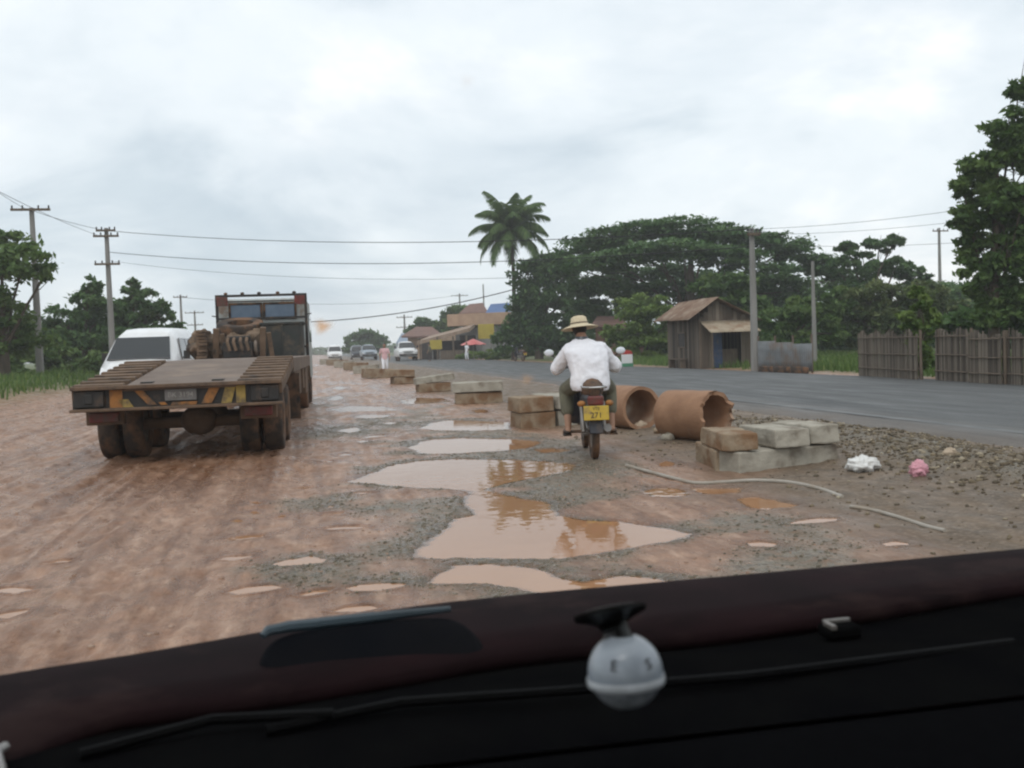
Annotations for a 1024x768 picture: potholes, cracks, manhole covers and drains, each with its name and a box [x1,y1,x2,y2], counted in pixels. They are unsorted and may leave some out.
pothole [652,459,681,468]
pothole [412,419,516,431]
pothole [398,489,707,562]
pothole [723,493,814,511]
pothole [334,457,588,497]
pothole [338,580,415,593]
pothole [413,558,698,594]
pothole [217,580,297,597]
pothole [397,436,555,455]
pothole [870,537,924,548]
pothole [263,553,336,568]
pothole [678,484,758,496]
